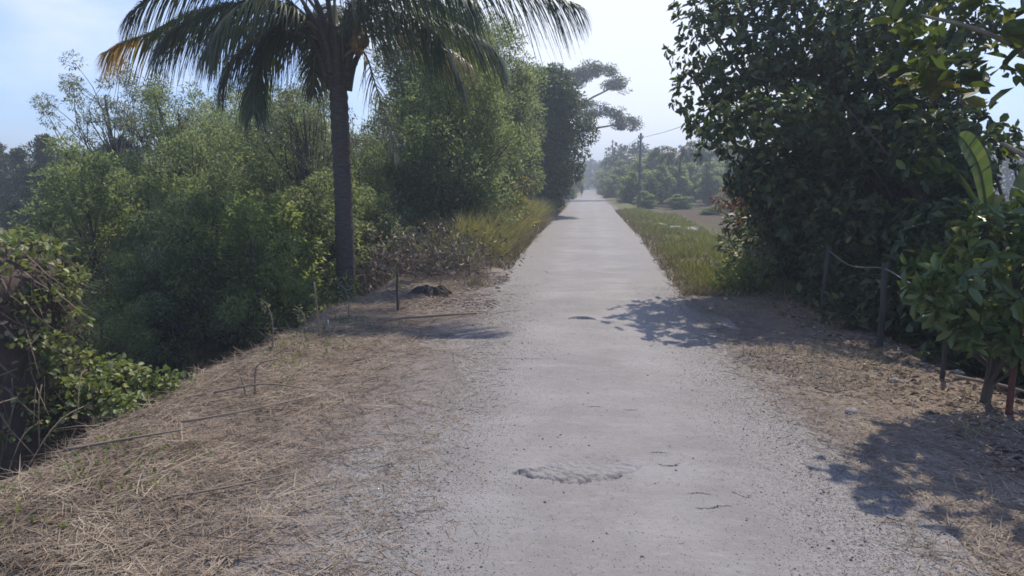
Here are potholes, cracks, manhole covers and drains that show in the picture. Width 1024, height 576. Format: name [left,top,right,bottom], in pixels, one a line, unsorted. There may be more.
pothole [511,450,646,485]
crack [688,491,751,509]
